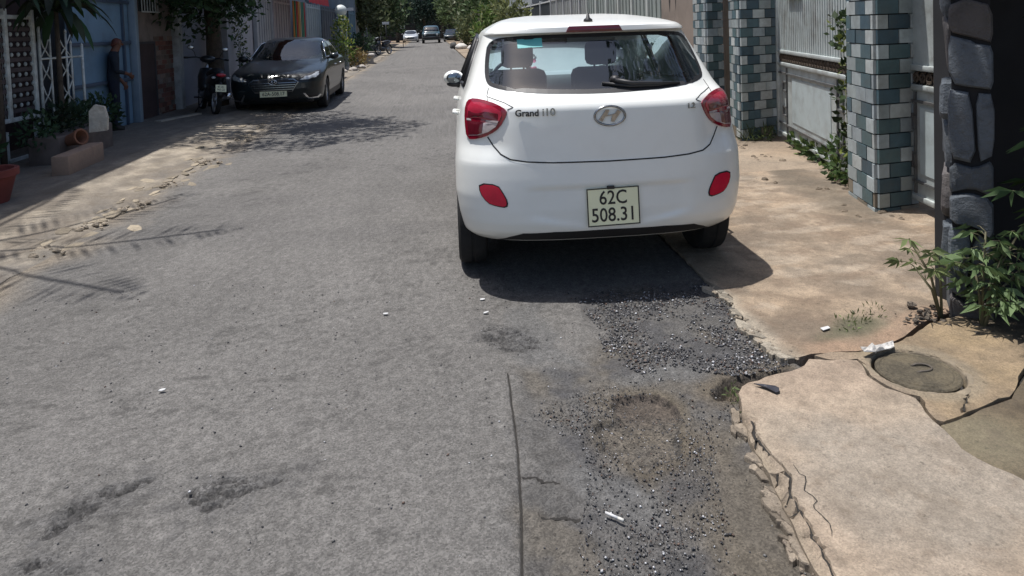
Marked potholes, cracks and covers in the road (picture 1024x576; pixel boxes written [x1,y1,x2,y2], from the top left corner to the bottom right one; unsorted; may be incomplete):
crack [522,477,560,485]
manhole cover [862,349,974,396]
pothole [593,393,685,475]
